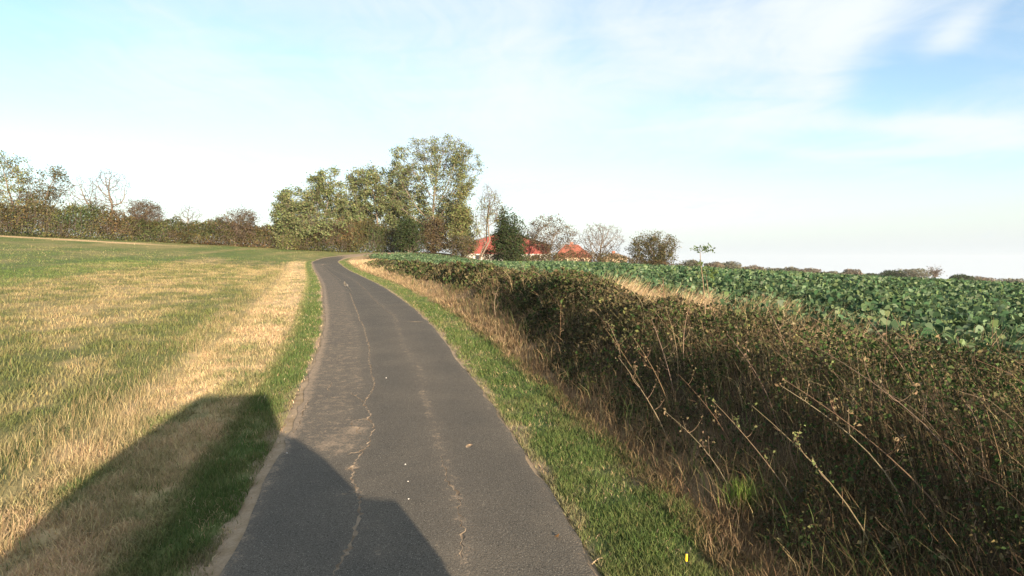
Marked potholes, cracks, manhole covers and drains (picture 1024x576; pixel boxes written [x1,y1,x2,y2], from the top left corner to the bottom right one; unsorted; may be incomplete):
crack [440,454,467,560]
crack [323,266,393,576]
